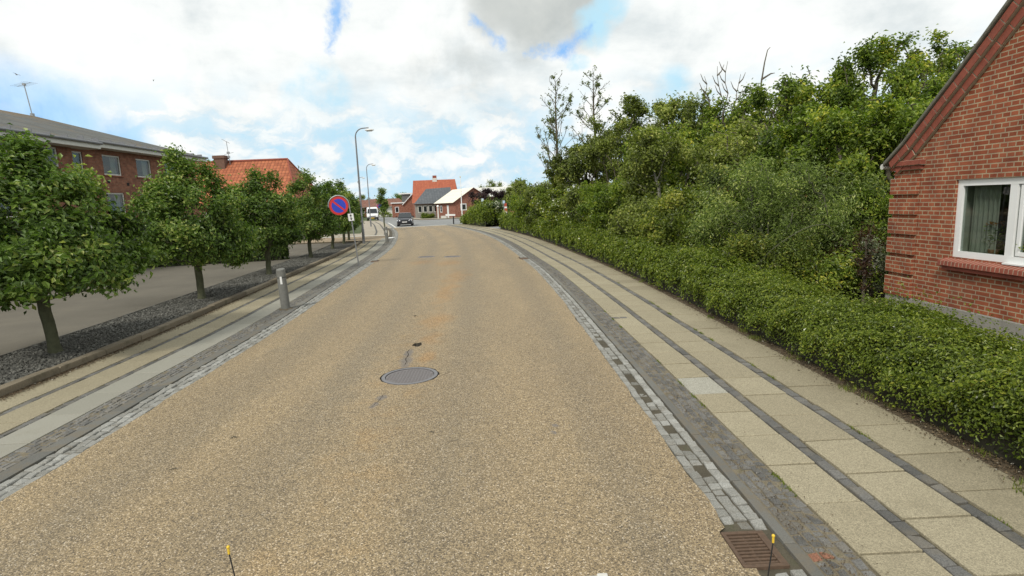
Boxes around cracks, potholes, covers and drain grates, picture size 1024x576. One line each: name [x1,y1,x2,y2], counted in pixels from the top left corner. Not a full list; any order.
drain grate [721,530,790,570]
manhole cover [380,367,440,385]
